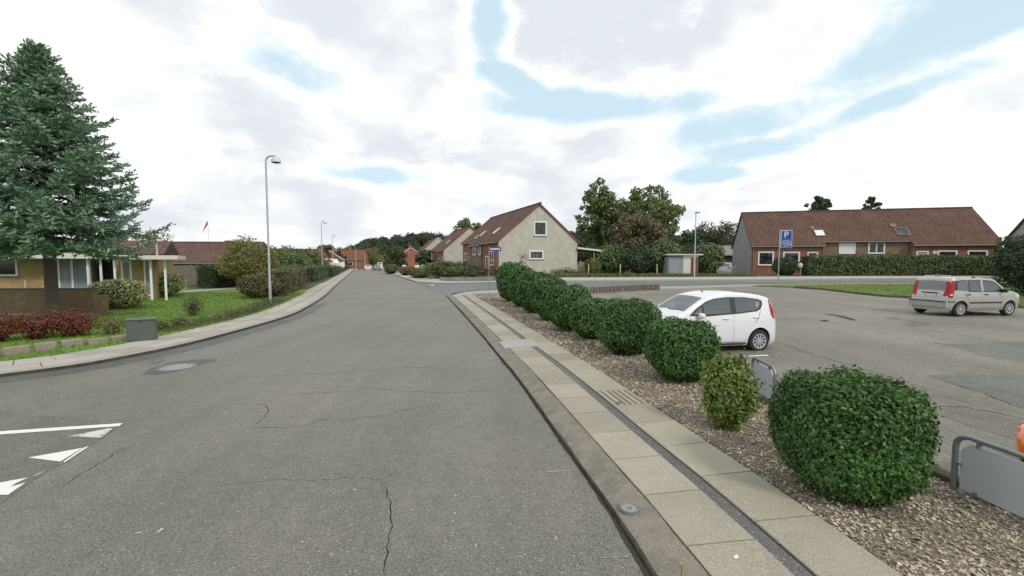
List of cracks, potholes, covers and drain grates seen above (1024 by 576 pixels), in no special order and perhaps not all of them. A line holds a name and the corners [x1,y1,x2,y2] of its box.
manhole cover [143,359,215,375]
crack [239,389,495,431]
crack [219,473,396,576]
crack [259,367,427,377]
